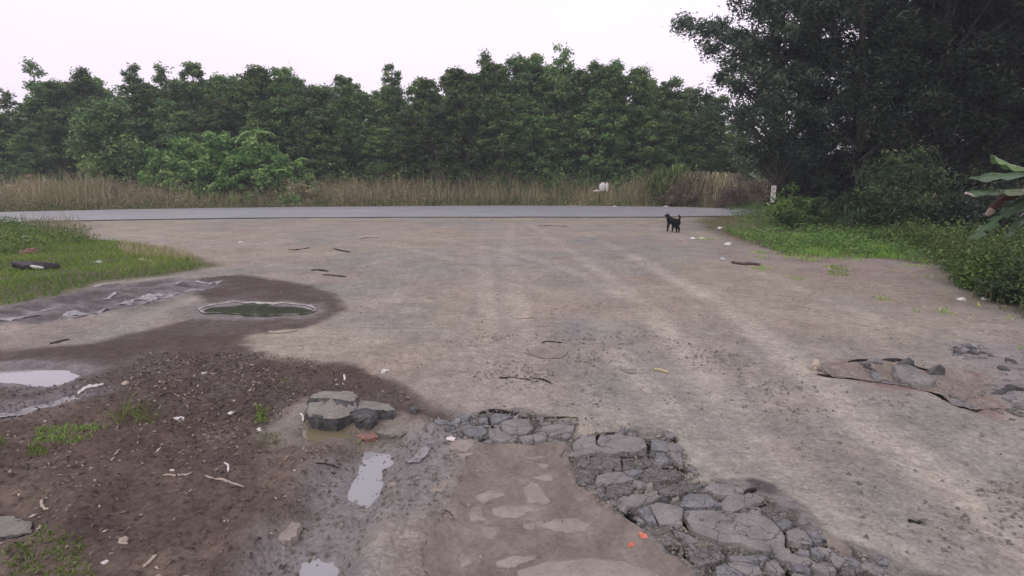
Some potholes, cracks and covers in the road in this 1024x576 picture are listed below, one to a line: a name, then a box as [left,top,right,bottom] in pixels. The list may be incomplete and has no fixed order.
crack [673,521,723,559]
crack [744,488,769,508]
pothole [199,302,316,316]
crack [768,533,828,576]
crack [617,509,638,524]
crack [586,432,683,473]
pothole [818,360,1001,409]
crack [467,409,578,441]
